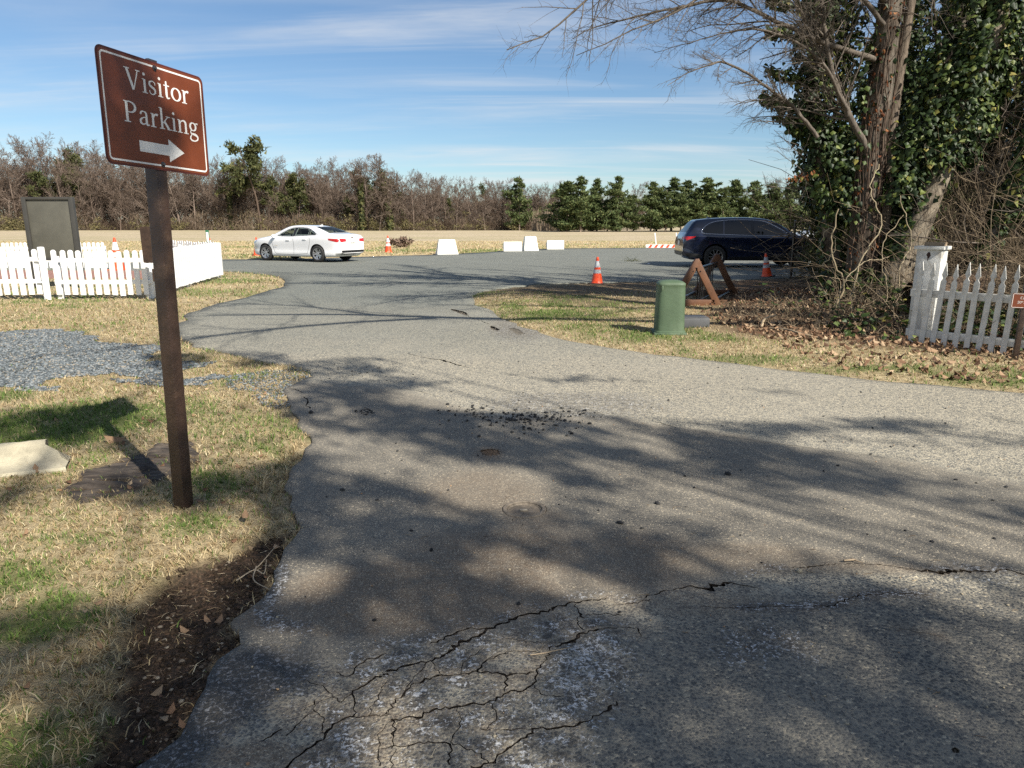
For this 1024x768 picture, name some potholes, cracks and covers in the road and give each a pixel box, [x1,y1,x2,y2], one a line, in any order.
crack [793,563,1024,575]
crack [615,582,926,609]
manhole cover [502,500,547,518]
